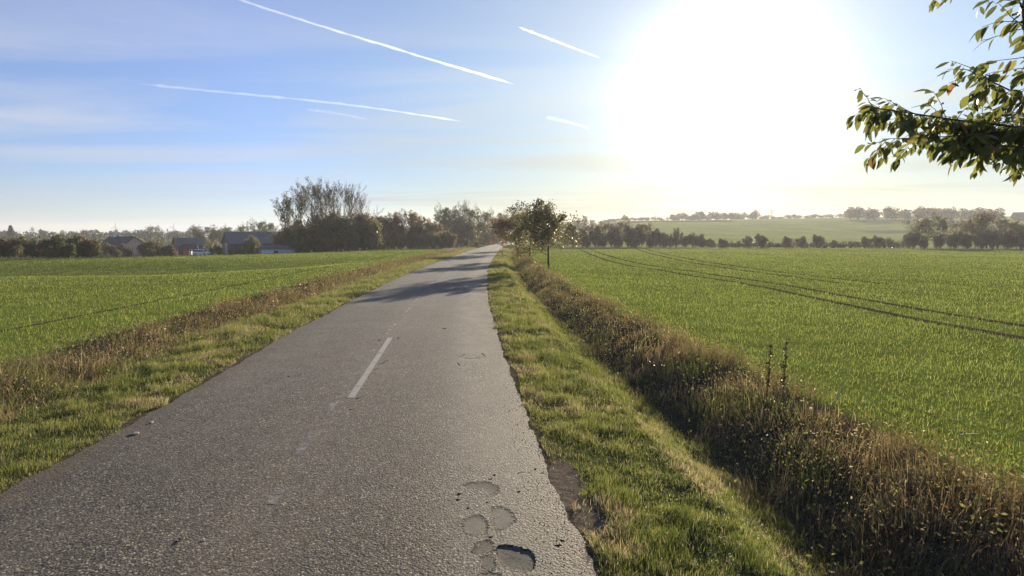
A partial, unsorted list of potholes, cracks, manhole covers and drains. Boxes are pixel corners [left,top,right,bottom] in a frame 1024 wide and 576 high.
pothole [469,539,496,554]
pothole [460,481,500,495]
pothole [480,554,498,573]
pothole [495,544,536,572]
pothole [490,506,518,531]
pothole [461,514,490,537]
